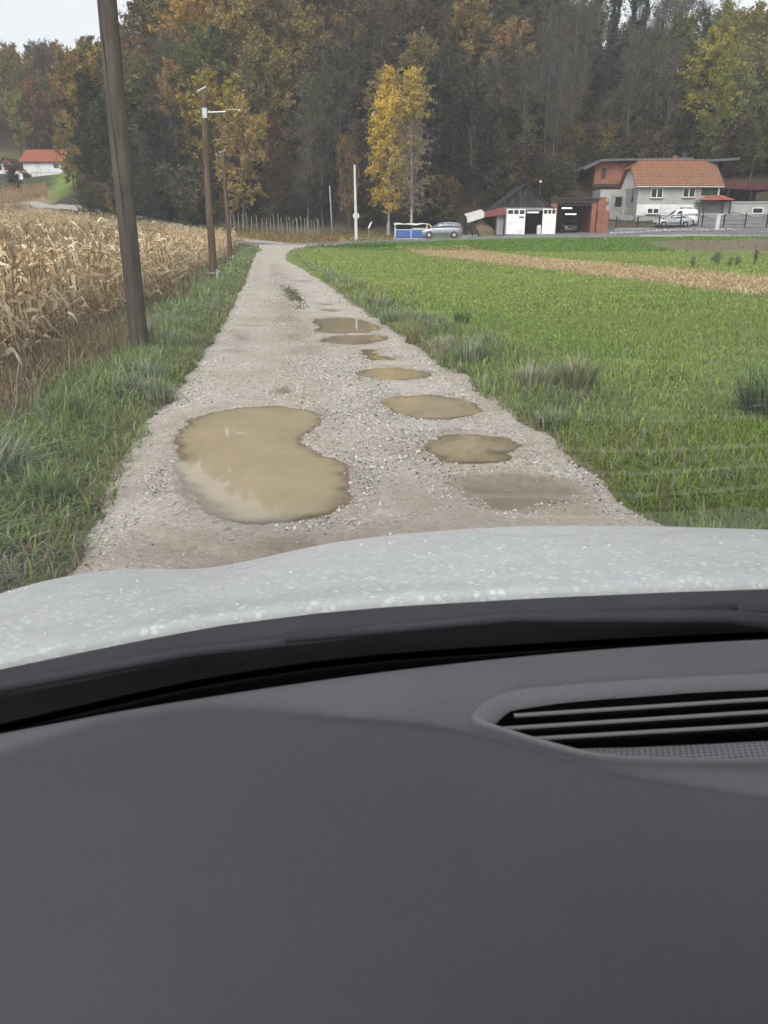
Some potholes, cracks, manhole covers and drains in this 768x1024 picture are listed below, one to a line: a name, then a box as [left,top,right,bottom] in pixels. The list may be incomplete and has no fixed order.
pothole [348,365,438,381]
pothole [314,333,394,345]
pothole [433,463,600,514]
pothole [307,316,384,334]
pothole [372,391,490,420]
pothole [348,347,404,361]
pothole [159,403,369,529]
pothole [412,428,533,465]
